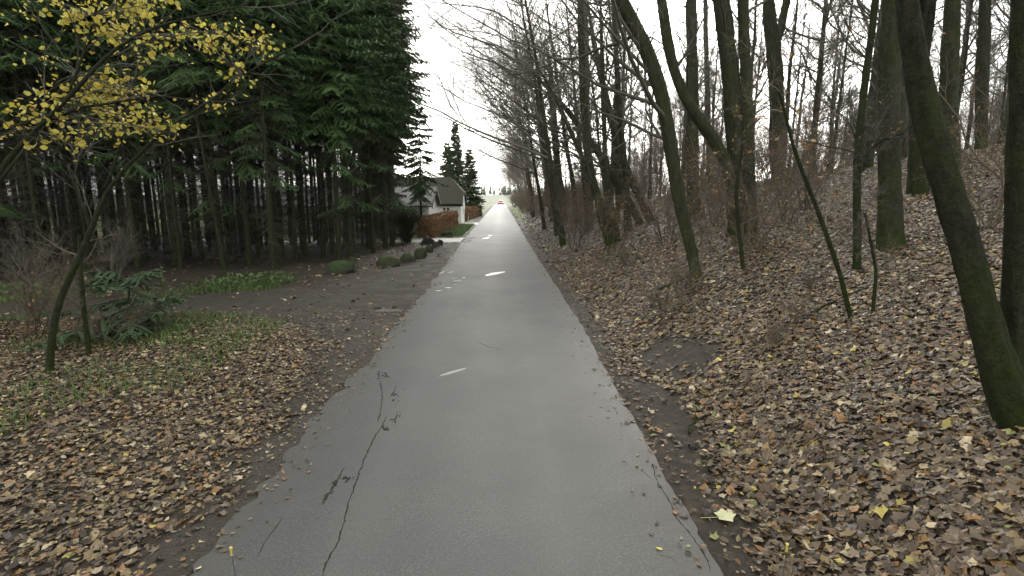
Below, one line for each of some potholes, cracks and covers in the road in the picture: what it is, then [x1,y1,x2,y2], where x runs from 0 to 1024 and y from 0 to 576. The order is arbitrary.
crack [645,467,710,569]
crack [322,363,405,576]
